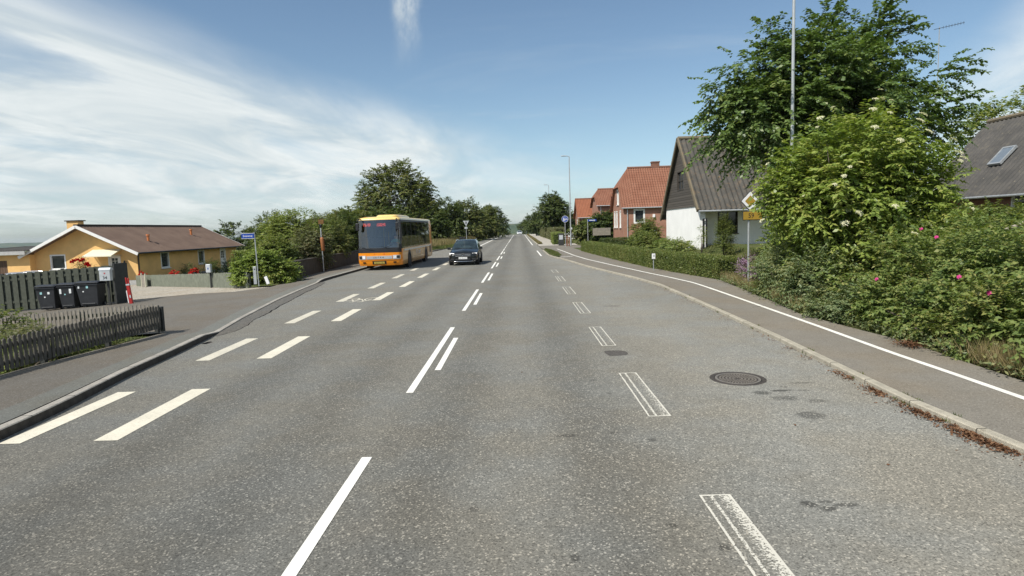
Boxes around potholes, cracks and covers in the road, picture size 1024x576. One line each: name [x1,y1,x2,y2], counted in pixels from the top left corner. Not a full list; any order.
manhole cover [709,372,767,386]
